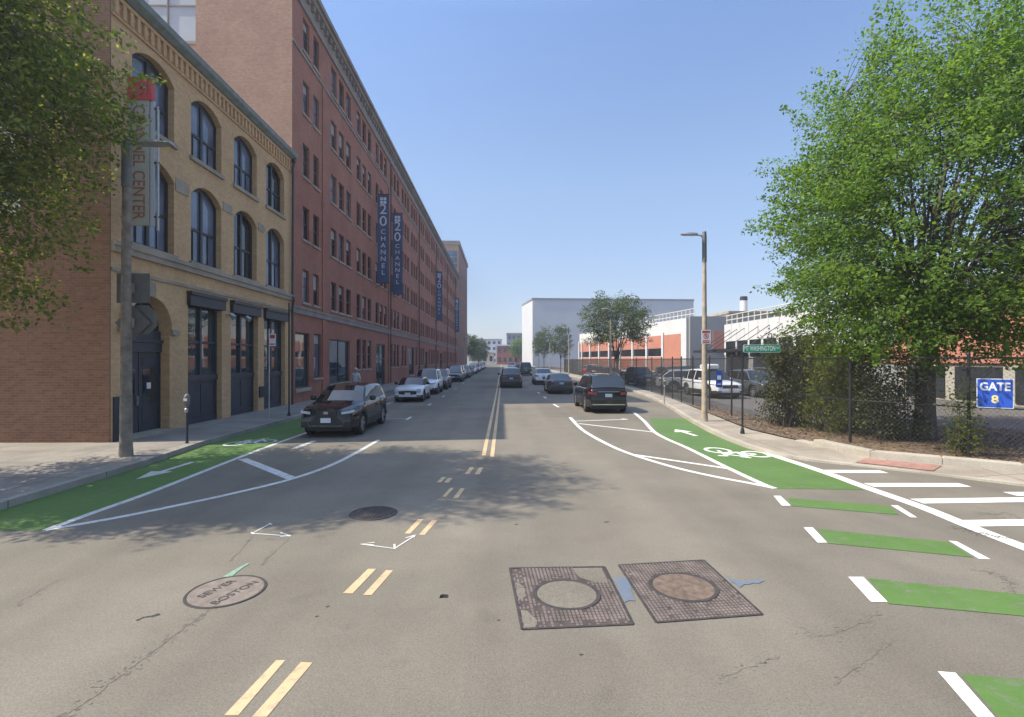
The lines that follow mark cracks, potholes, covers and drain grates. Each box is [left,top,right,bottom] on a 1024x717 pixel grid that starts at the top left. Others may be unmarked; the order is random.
manhole cover [349,506,398,521]
crack [56,608,215,717]
manhole cover [182,575,268,609]
crack [795,611,895,685]
crack [716,655,780,684]
crack [229,536,290,565]
crack [975,570,1019,594]
